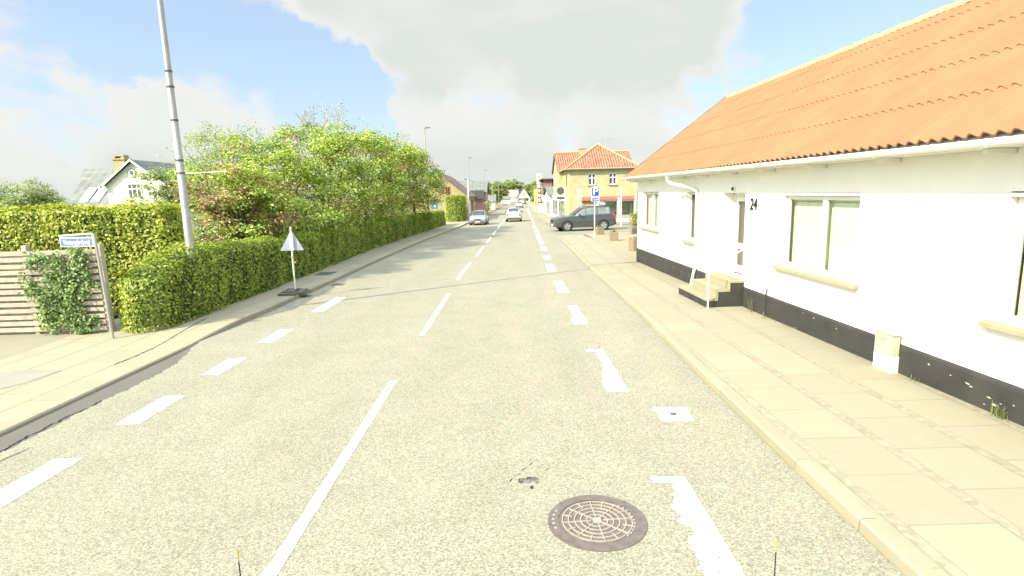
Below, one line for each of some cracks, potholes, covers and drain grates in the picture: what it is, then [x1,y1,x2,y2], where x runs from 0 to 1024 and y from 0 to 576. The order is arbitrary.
manhole cover [548,495,648,552]
pothole [518,476,539,484]
